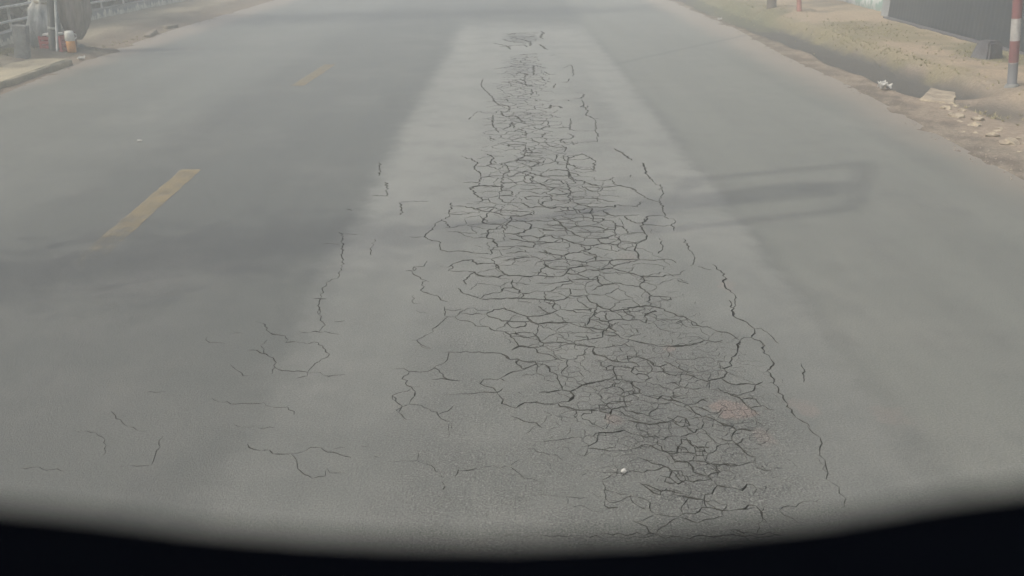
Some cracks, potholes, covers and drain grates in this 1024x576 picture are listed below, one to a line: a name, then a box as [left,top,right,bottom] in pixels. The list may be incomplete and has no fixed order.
crack [75,411,164,467]
crack [376,162,427,215]
crack [392,55,827,538]
crack [256,232,376,378]
crack [234,424,376,478]
crack [494,31,550,55]
